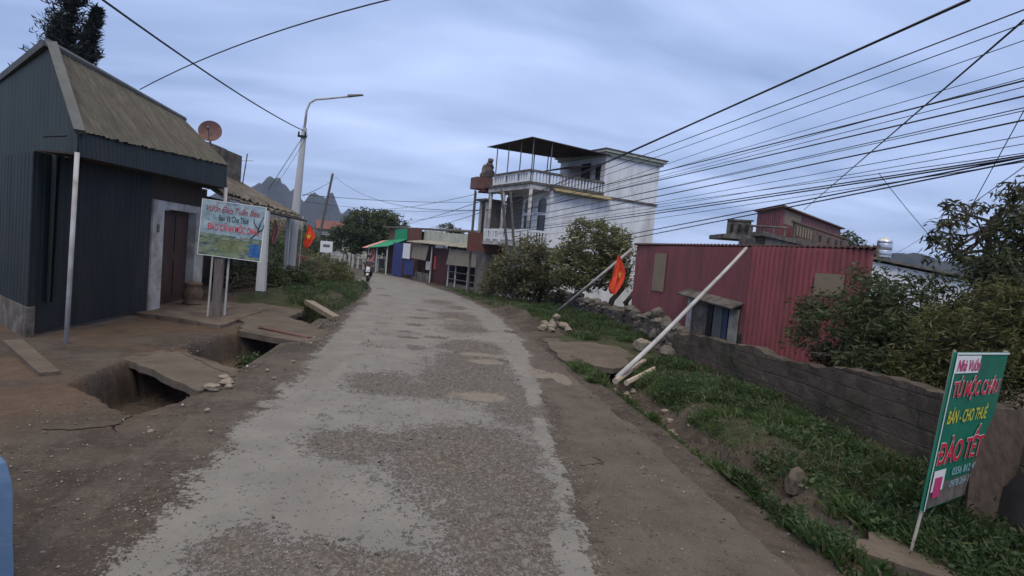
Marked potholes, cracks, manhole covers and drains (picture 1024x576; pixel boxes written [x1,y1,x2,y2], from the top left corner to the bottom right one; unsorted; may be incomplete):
crack [43,416,132,431]
